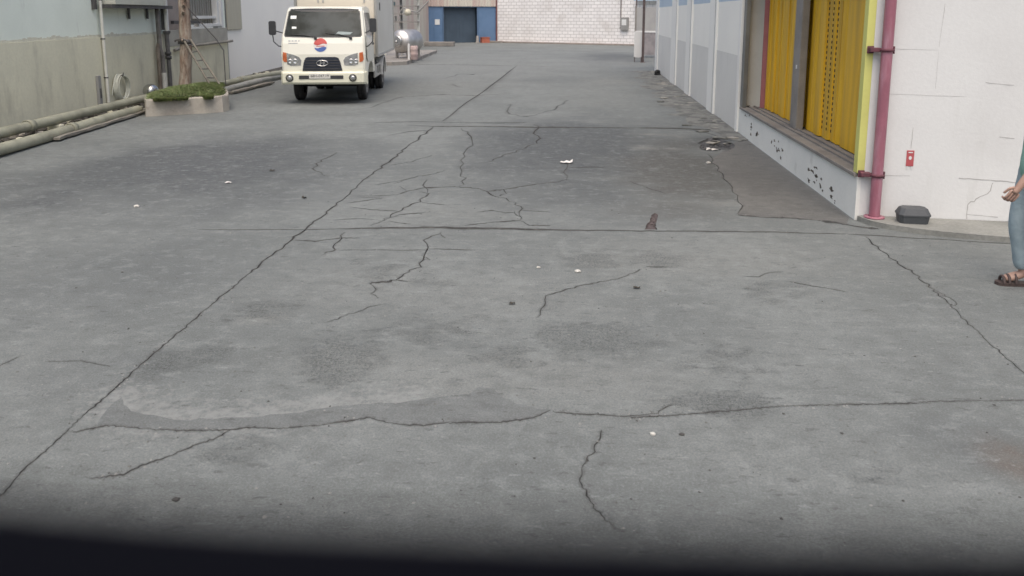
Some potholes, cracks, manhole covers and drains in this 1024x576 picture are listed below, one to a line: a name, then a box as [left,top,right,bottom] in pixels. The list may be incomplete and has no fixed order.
crack [4,74,1024,524]
